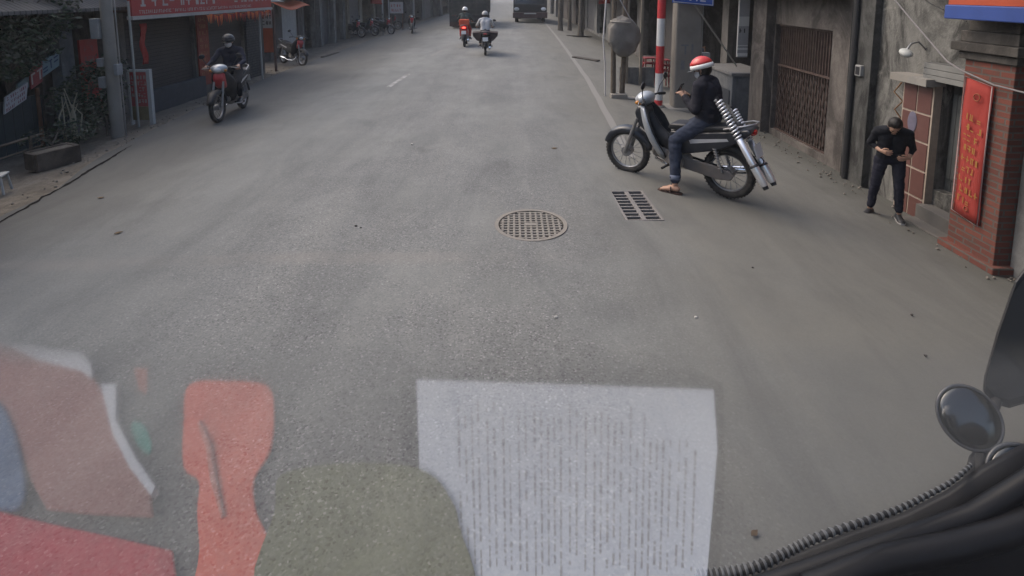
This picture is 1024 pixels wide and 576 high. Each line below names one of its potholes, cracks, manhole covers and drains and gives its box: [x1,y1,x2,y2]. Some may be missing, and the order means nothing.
drain grate [611,190,665,221]
manhole cover [495,209,568,241]
